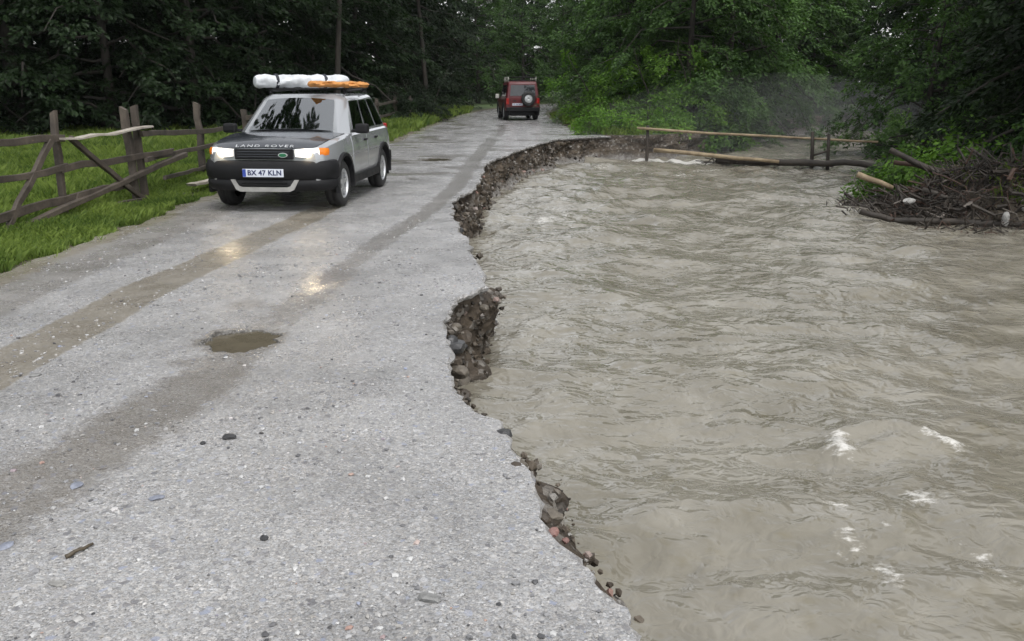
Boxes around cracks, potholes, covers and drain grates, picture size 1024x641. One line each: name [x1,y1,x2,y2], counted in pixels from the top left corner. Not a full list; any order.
pothole [197,329,284,353]
